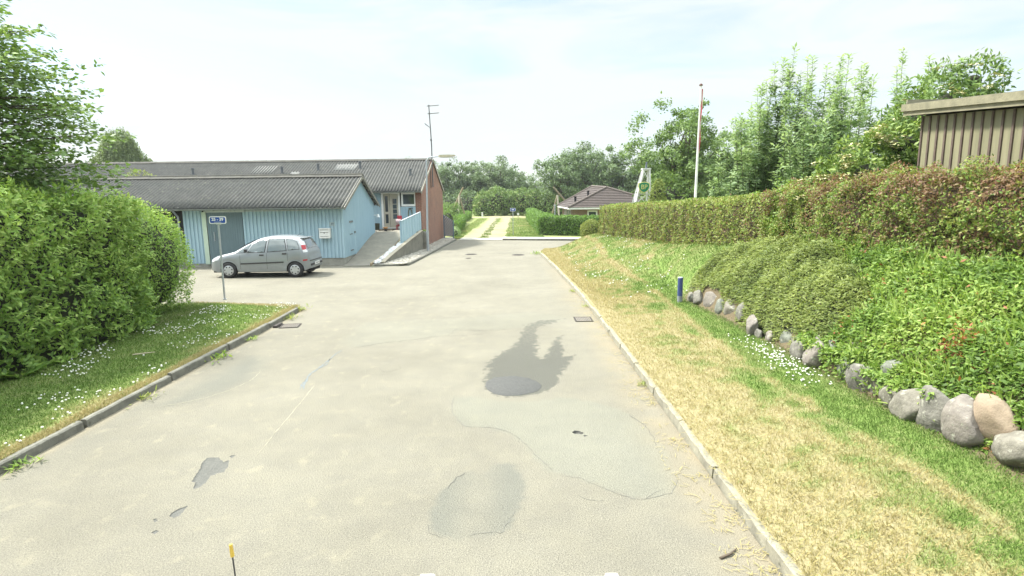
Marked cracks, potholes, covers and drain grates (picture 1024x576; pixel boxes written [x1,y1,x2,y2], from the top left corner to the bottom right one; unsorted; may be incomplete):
pothole [192,457,229,489]
